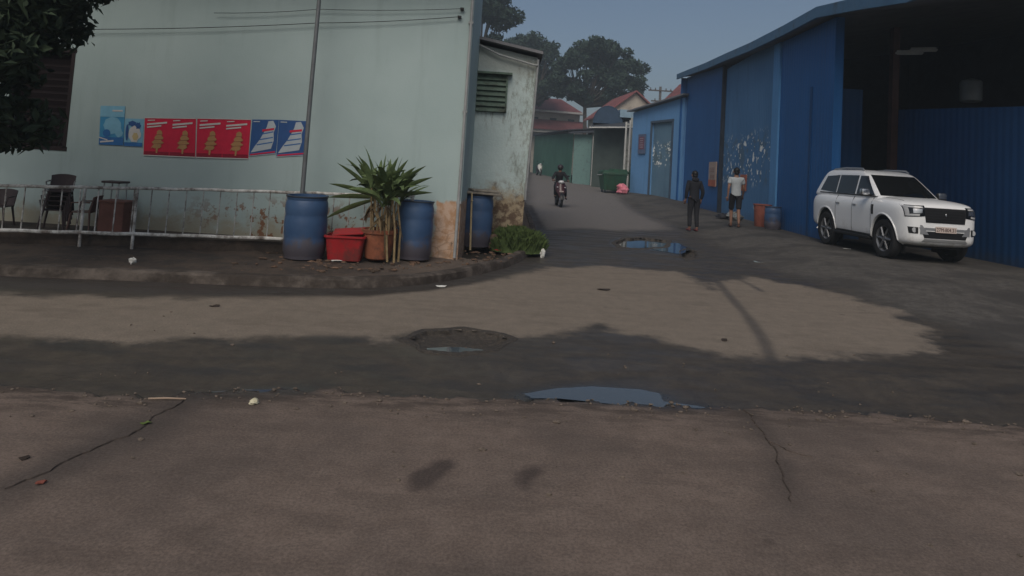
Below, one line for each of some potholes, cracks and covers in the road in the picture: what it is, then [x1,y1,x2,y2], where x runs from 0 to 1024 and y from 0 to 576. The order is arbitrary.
pothole [611,237,672,250]
pothole [396,326,518,357]
crack [743,409,812,501]
pothole [679,248,699,261]
